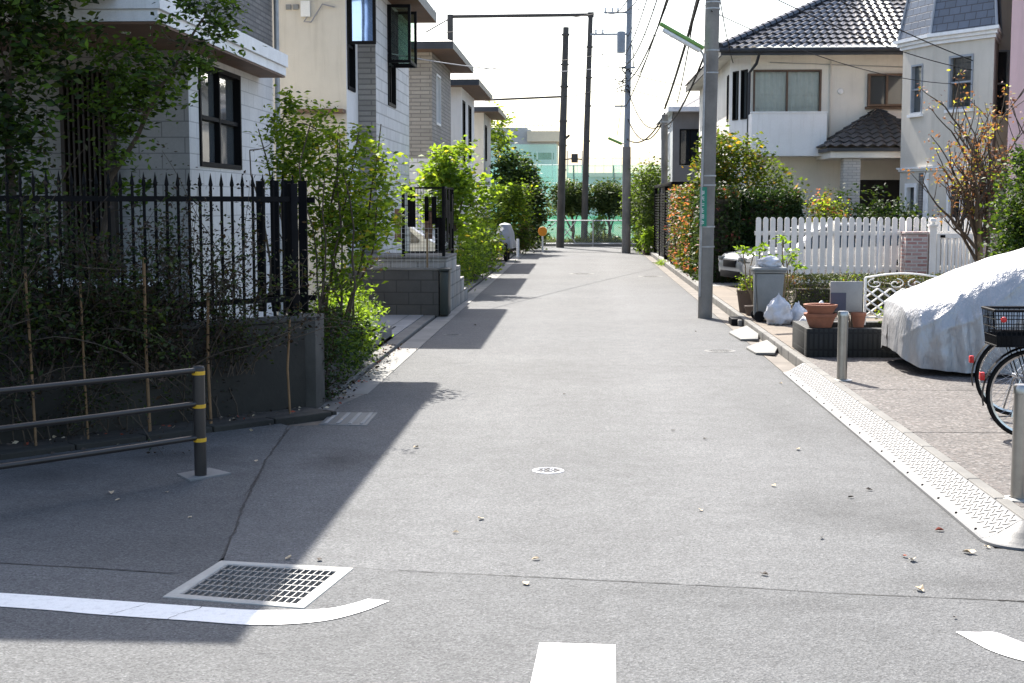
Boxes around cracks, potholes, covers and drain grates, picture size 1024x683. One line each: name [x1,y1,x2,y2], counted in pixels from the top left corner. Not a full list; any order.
crack [220,427,287,559]
drain grate [163,560,354,609]
